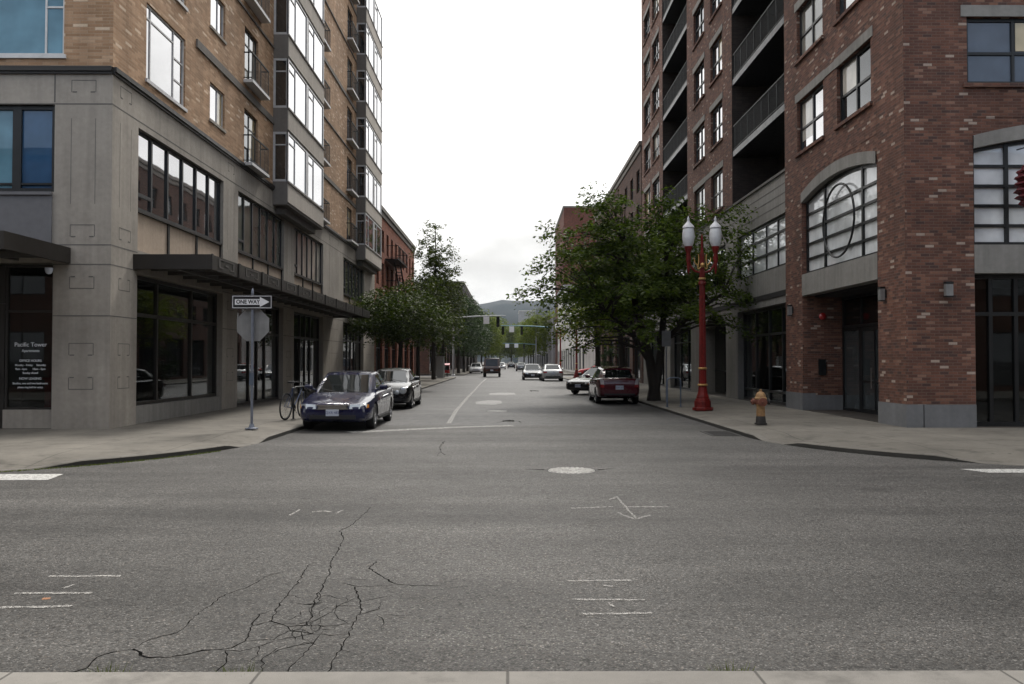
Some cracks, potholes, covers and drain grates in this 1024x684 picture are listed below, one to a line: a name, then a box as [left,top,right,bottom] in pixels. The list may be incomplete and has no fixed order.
crack [73,507,435,672]
